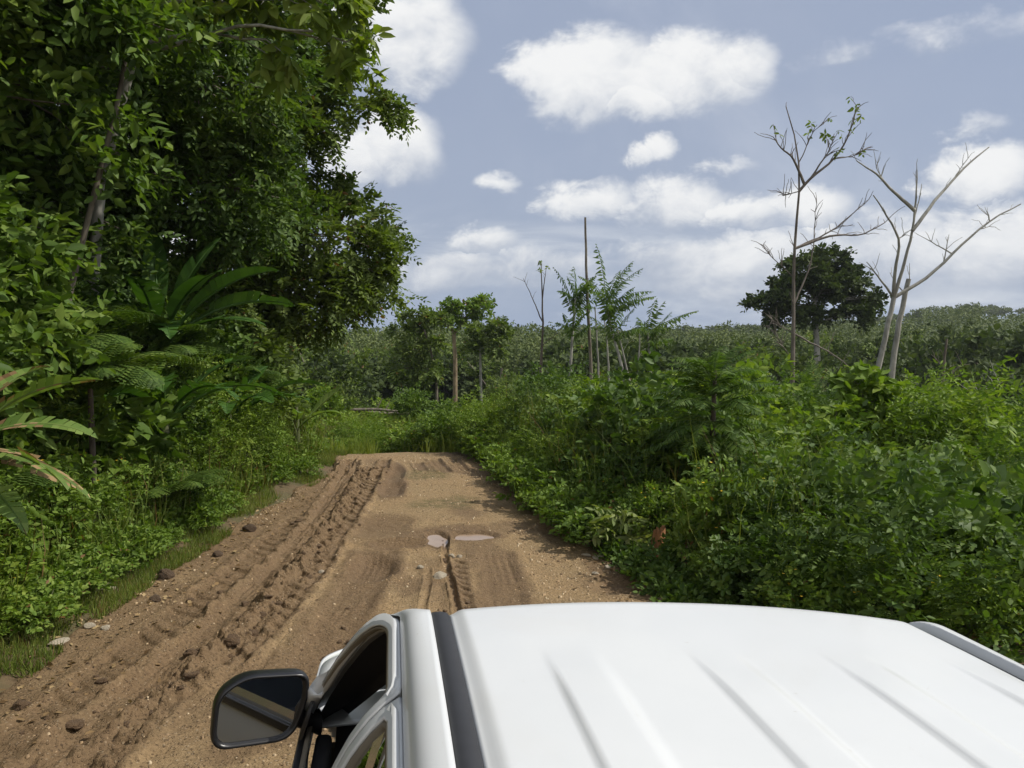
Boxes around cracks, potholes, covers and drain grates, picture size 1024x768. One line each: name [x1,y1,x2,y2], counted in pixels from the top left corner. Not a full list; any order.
pothole [423,529,451,550]
pothole [447,530,503,541]
